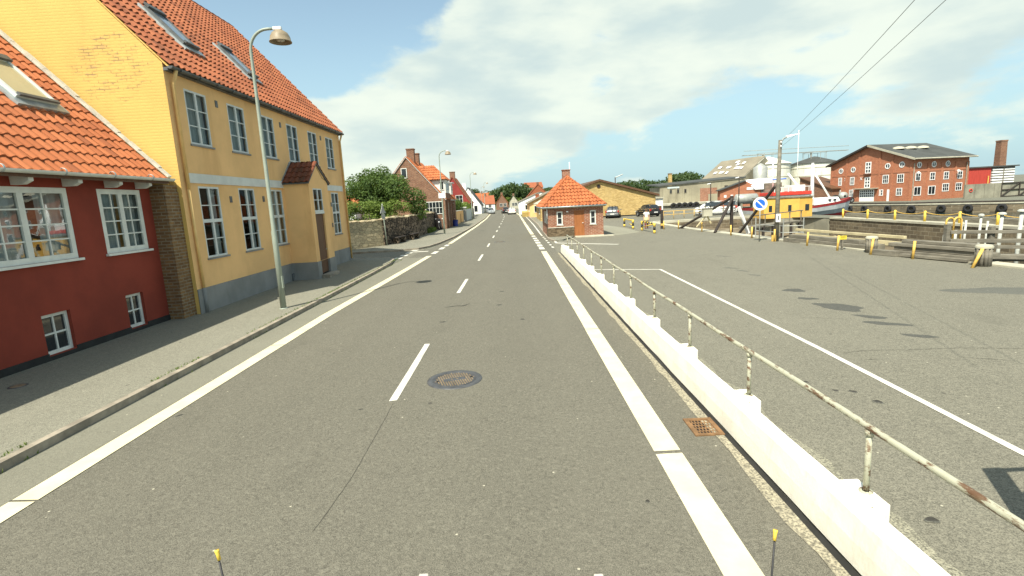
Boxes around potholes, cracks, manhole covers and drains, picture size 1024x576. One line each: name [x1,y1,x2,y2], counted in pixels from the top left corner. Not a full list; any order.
drain grate [683,417,725,436]
manhole cover [427,370,482,390]
crack [312,407,391,532]
